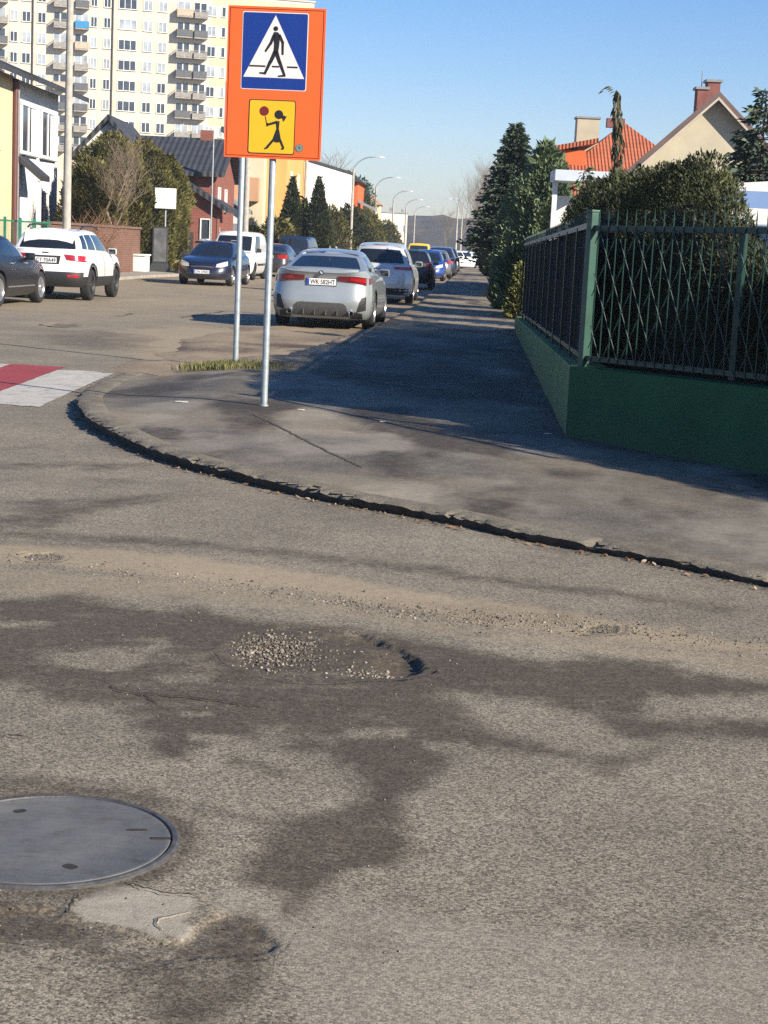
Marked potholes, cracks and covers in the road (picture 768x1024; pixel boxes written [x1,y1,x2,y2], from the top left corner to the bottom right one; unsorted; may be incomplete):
pothole [212,624,437,685]
crack [110,685,261,707]
crack [125,882,202,930]
pothole [15,551,70,562]
manhole cover [0,794,180,891]
